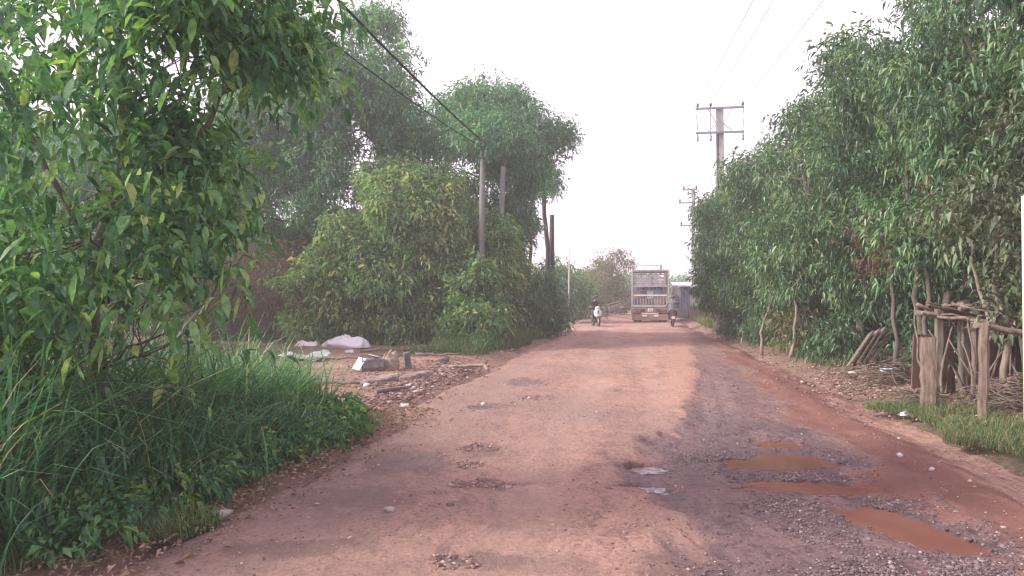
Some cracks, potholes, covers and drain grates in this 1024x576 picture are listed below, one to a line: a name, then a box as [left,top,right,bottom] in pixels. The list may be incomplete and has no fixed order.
pothole [719,476,899,498]
pothole [742,437,814,451]
pothole [500,376,550,387]
pothole [614,460,674,475]
pothole [456,443,501,453]
pothole [818,501,1016,561]
pothole [430,554,474,569]
pothole [454,478,507,489]
pothole [464,403,515,411]
pothole [608,479,675,496]
pothole [704,450,861,474]
